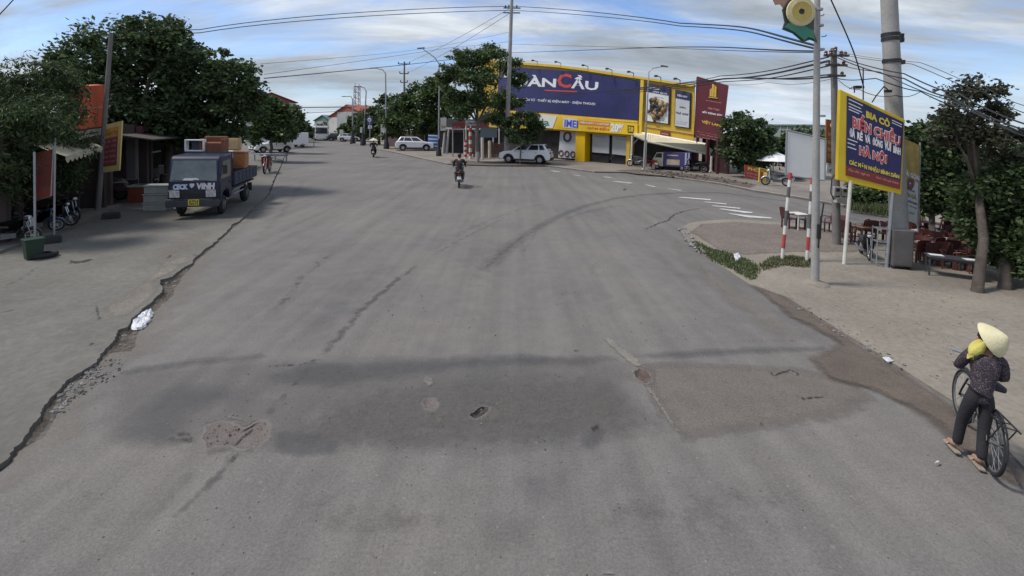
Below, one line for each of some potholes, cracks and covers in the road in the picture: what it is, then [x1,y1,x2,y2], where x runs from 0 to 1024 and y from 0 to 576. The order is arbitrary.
pothole [470,406,489,419]
